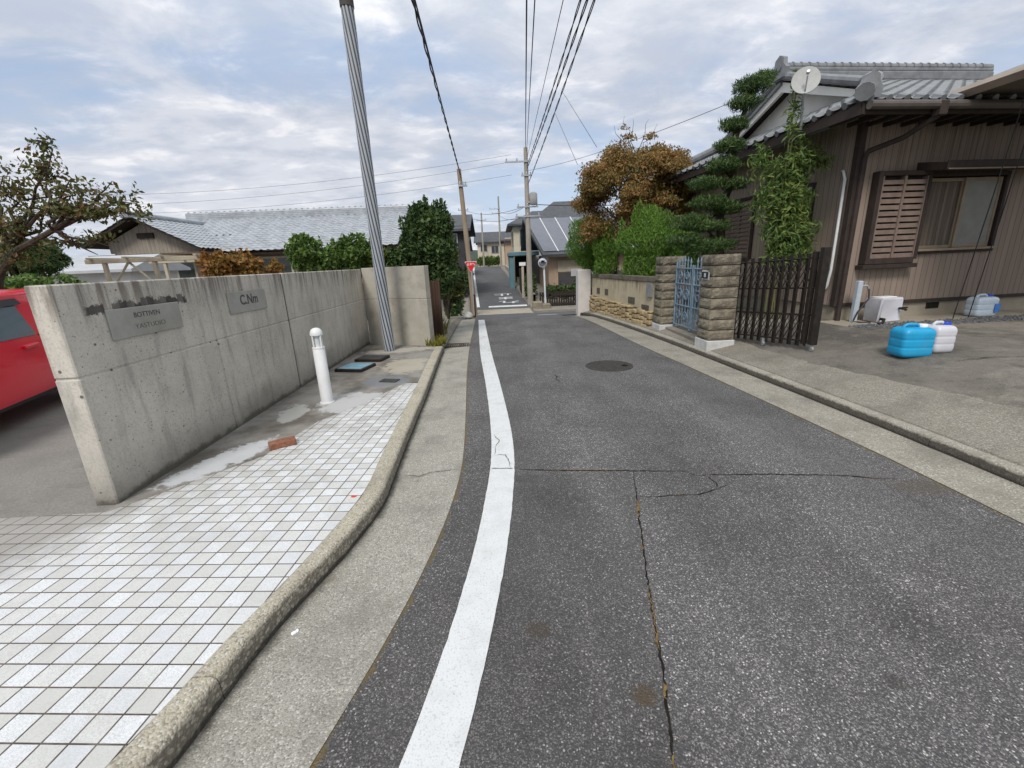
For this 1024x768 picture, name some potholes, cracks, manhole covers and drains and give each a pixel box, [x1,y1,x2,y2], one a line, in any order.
manhole cover [585,360,633,372]
